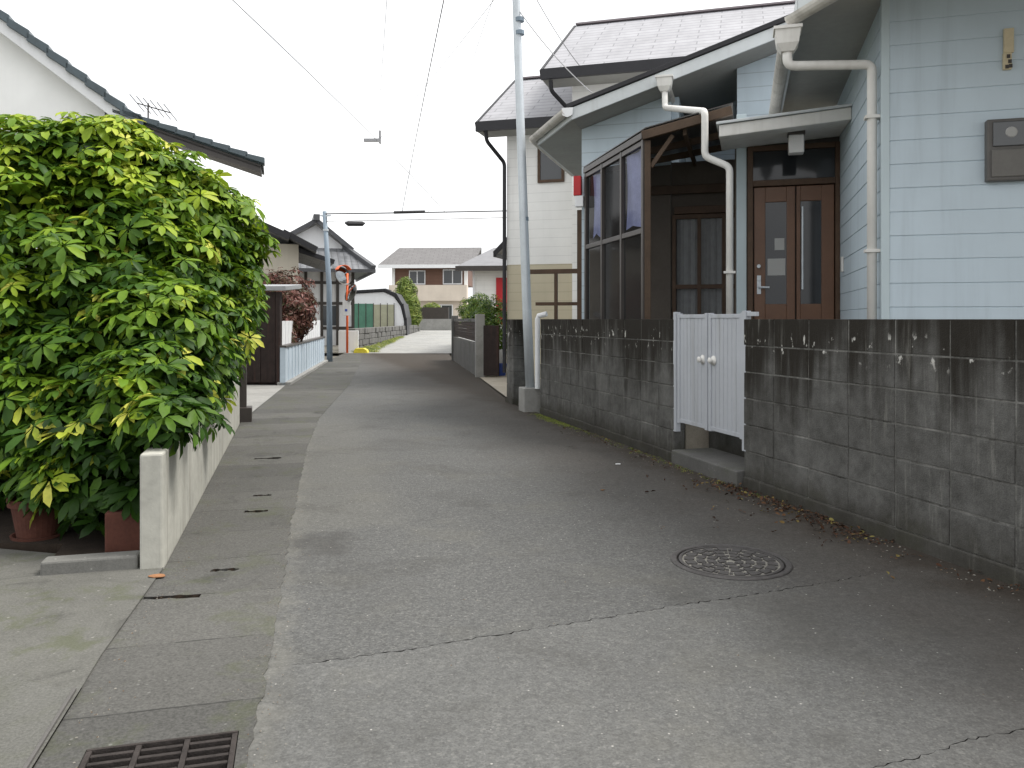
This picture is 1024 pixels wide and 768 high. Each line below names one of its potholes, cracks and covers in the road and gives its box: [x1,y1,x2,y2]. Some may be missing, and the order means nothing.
manhole cover [670,544,793,581]
crack [295,575,861,665]
crack [873,729,1024,768]
drain grate [79,730,239,768]
